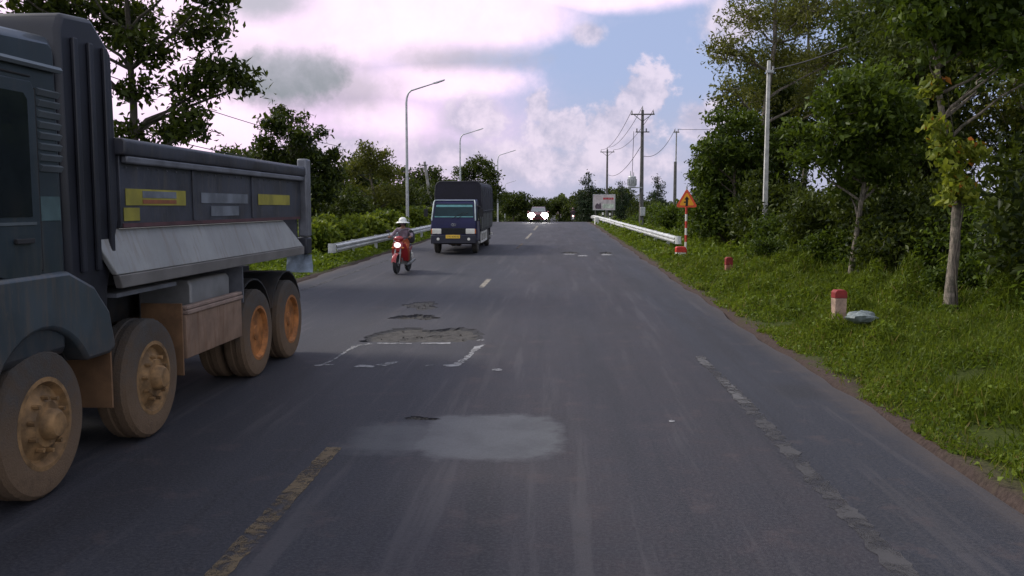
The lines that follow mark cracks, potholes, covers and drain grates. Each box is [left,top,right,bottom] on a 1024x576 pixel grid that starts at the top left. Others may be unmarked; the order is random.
pothole [402,301,438,311]
pothole [359,327,485,343]
